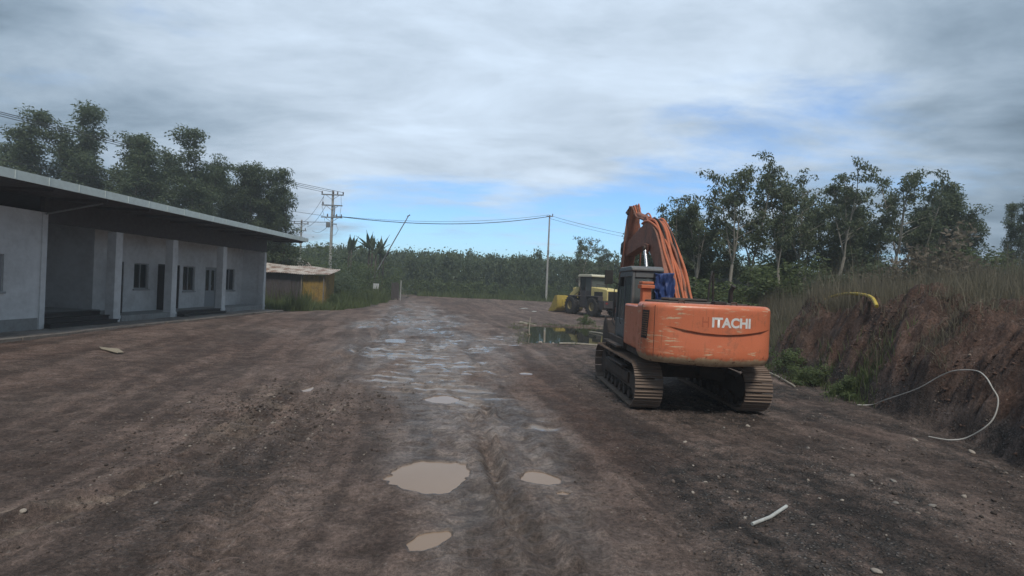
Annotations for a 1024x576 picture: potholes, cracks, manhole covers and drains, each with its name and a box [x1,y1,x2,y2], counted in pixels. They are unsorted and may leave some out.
pothole [369,456,485,502]
pothole [388,523,467,561]
pothole [505,466,577,490]
